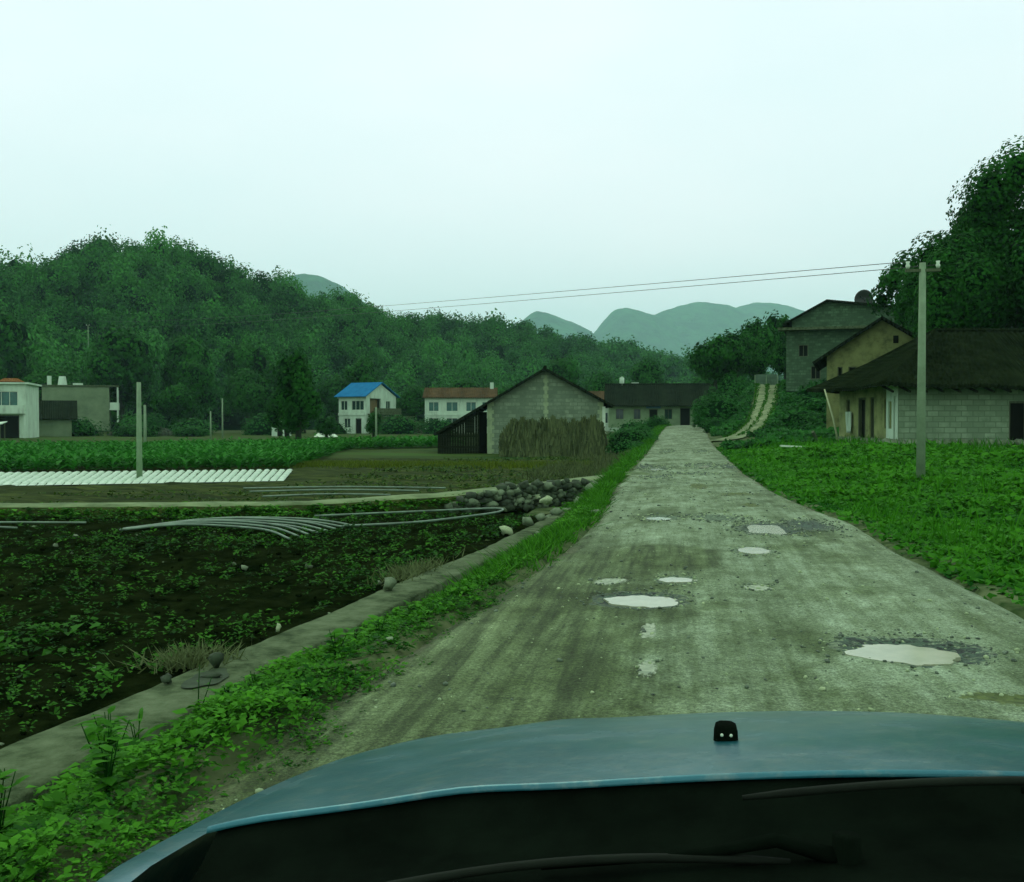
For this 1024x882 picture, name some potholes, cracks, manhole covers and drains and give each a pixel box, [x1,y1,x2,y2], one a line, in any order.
pothole [634,513,688,523]
pothole [587,576,635,586]
pothole [727,545,781,558]
pothole [772,629,1024,676]
pothole [734,583,775,592]
pothole [560,586,716,613]
pothole [646,573,706,587]
pothole [719,518,821,538]
